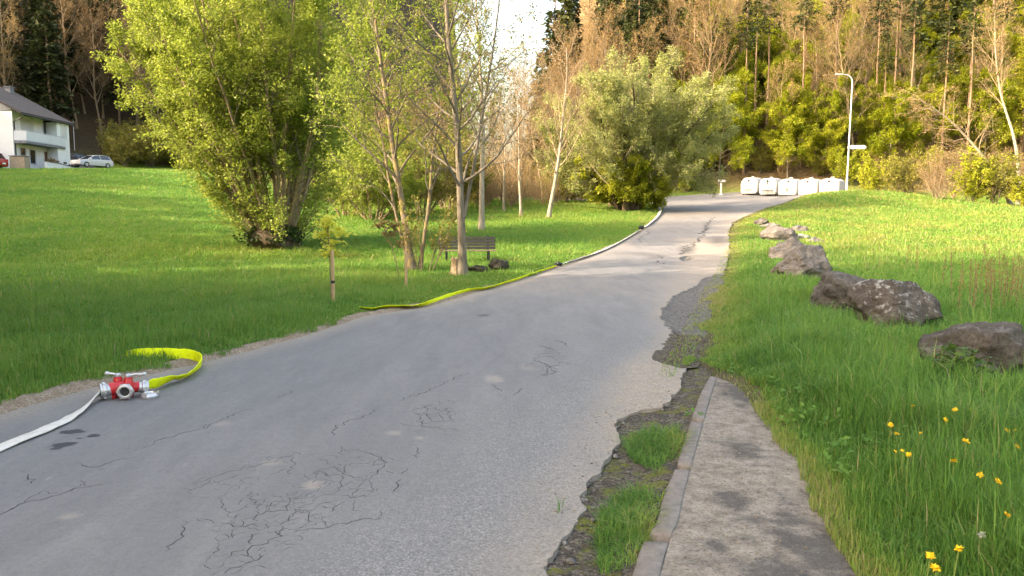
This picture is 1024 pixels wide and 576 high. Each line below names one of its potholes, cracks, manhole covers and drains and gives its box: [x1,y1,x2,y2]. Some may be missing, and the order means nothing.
crack [0,457,130,515]
crack [185,409,420,576]
crack [638,217,715,265]
crack [526,340,570,376]
crack [401,373,469,434]
